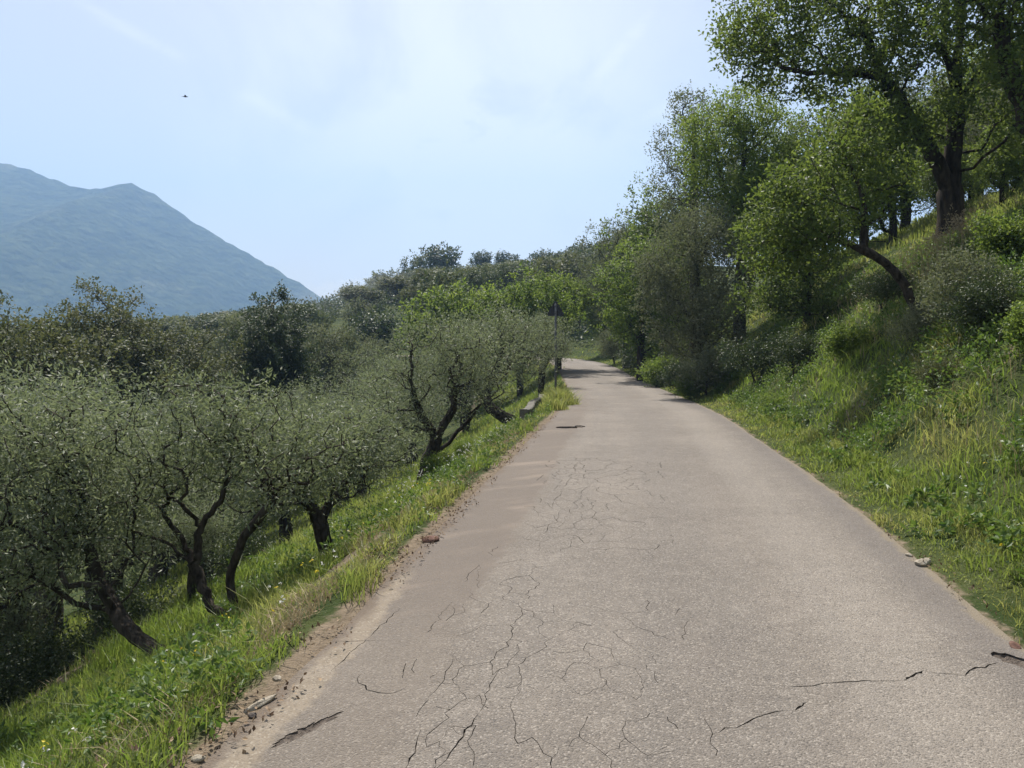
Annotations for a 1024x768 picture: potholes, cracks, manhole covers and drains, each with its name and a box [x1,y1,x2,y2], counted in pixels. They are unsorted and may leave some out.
crack [333,457,999,768]
